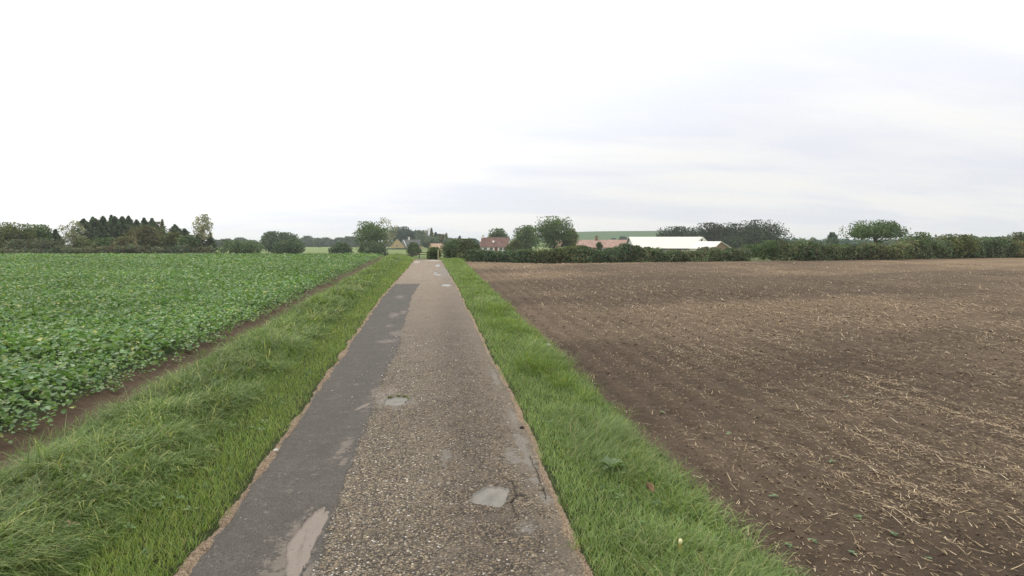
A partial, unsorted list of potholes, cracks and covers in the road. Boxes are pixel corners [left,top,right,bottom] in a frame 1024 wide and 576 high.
crack [502,456,546,520]
